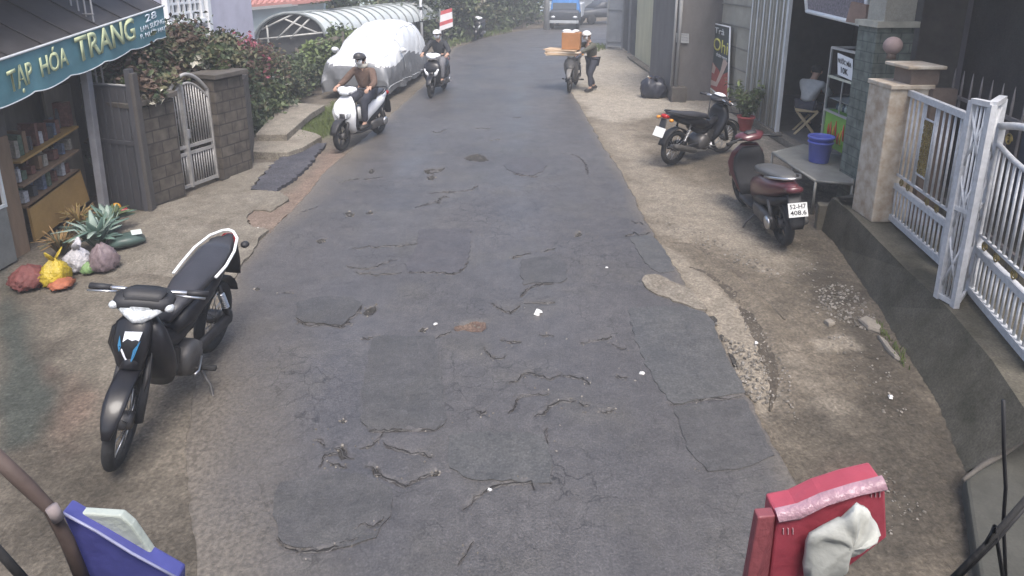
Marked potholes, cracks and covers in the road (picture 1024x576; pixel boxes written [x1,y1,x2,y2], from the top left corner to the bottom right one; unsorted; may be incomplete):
crack [415,185,478,208]
crack [463,480,535,510]
crack [626,221,650,236]
crack [347,243,468,276]
crack [672,395,743,404]
crack [484,340,613,444]
crack [581,336,626,349]
crack [313,424,441,488]
crack [492,282,555,314]
pothole [464,154,489,162]
